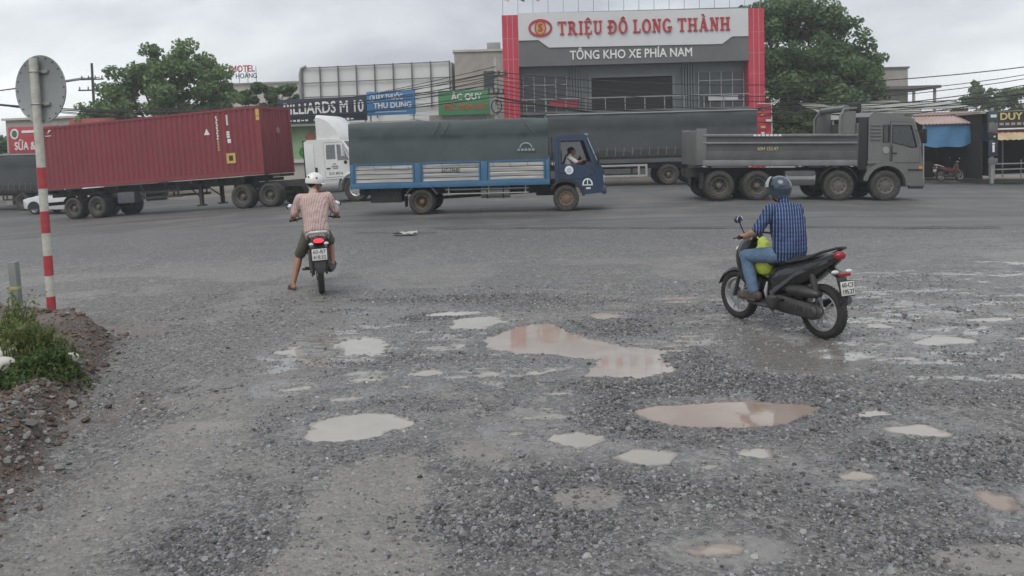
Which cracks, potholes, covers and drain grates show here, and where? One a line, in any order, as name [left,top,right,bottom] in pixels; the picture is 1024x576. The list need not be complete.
pothole [587,438,702,477]
pothole [311,334,407,361]
pothole [465,318,697,383]
pothole [433,312,522,334]
pothole [609,392,848,436]
pothole [857,415,982,447]
pothole [896,332,999,352]
pothole [411,307,496,319]
pothole [278,404,440,452]
